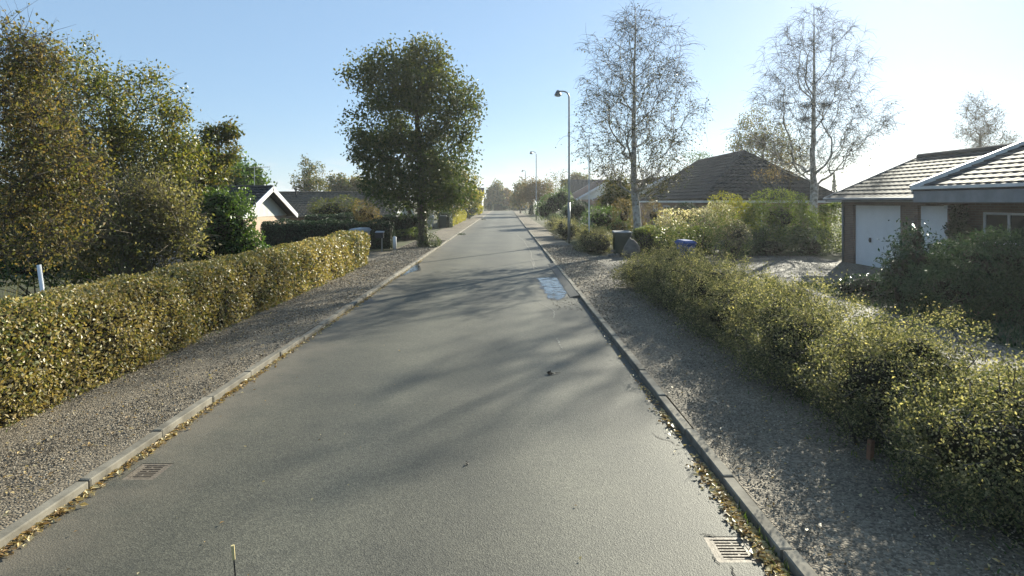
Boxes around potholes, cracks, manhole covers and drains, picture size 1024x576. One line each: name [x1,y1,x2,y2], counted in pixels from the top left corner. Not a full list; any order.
drain grate [121,464,172,480]
drain grate [703,537,762,562]
